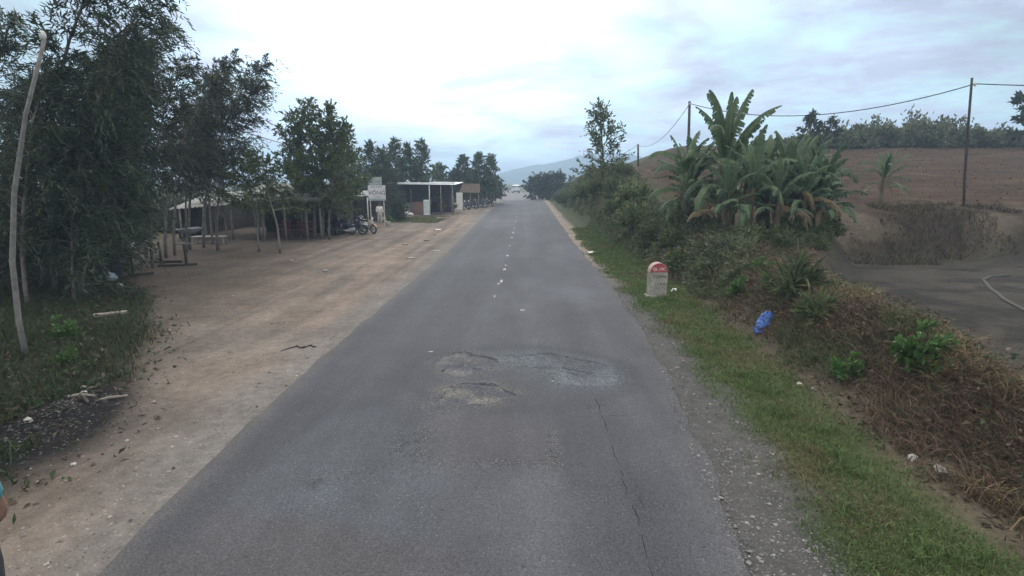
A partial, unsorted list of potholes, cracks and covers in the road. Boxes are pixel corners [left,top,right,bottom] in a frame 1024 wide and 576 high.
crack [595,399,653,576]
pothole [500,352,620,386]
pothole [433,351,499,377]
pothole [438,382,517,404]
